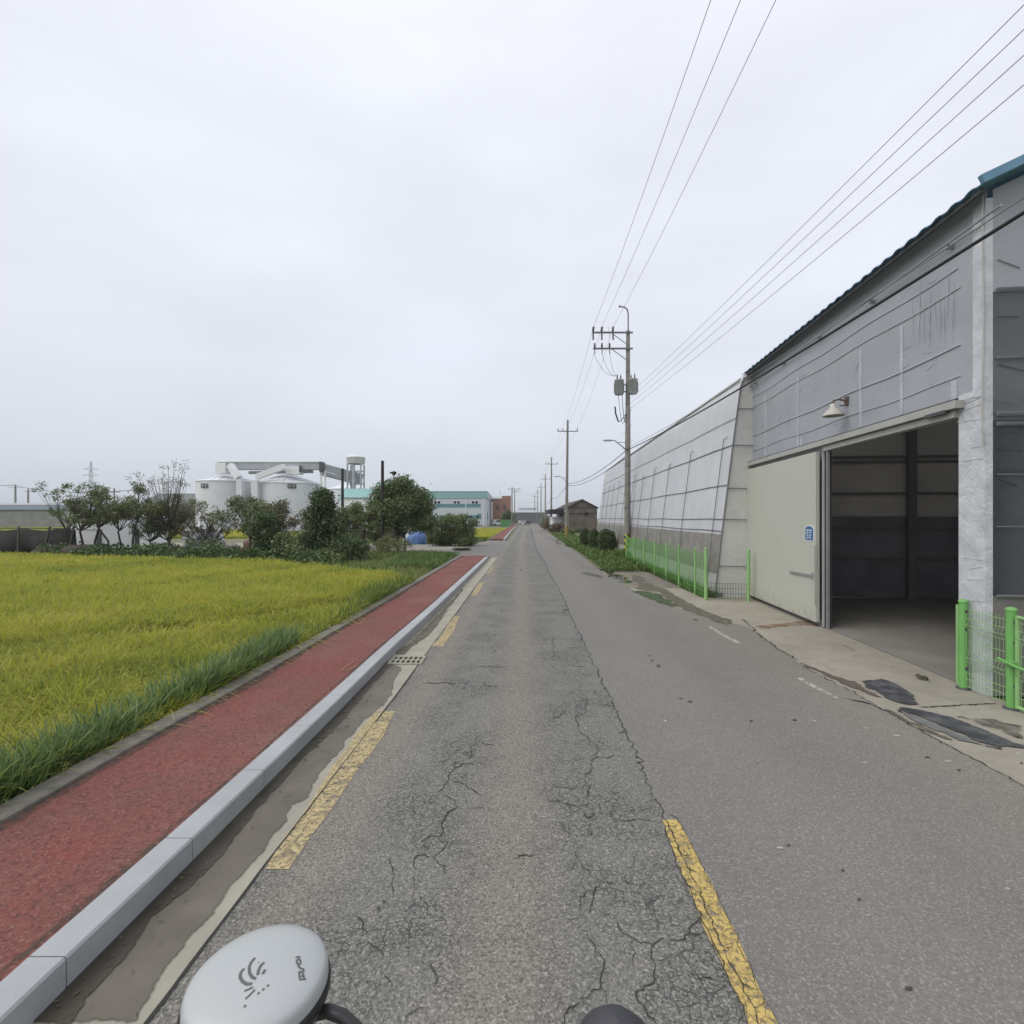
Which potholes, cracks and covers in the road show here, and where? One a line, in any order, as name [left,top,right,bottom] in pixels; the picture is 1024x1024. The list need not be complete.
drain grate [387,656,426,665]
crack [401,742,494,937]
crack [547,698,777,1024]
